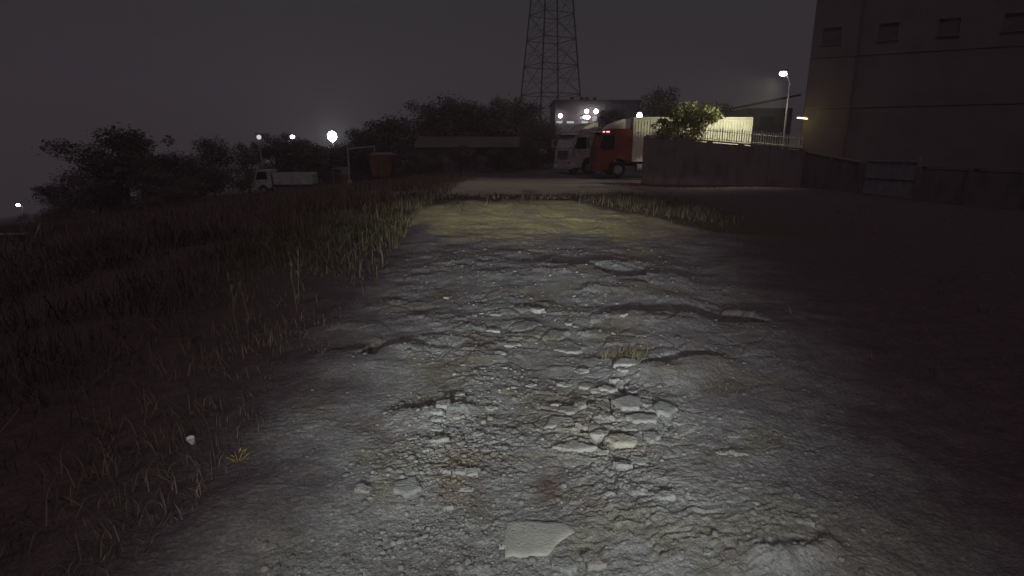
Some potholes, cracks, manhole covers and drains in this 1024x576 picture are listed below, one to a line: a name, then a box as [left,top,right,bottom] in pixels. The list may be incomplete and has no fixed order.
crack [569,379,674,450]
